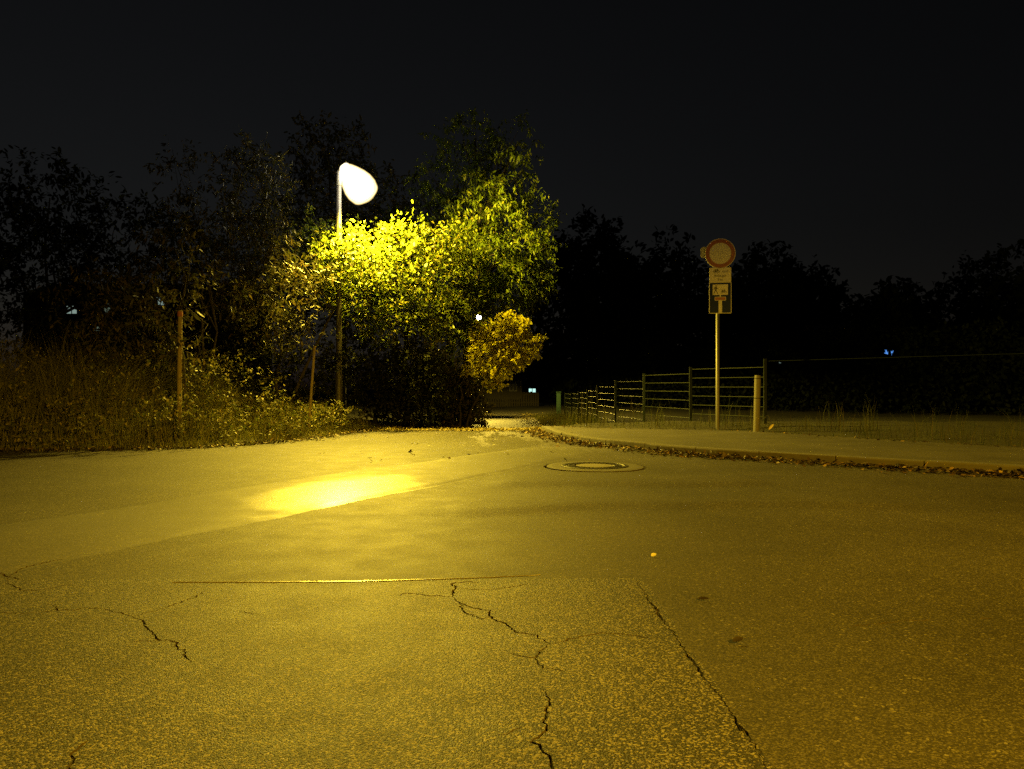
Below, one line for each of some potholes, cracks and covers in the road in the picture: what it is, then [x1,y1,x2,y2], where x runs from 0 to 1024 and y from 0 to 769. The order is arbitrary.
crack [400,581,657,671]
manhole cover [544,461,647,472]
crack [0,559,203,661]
crack [501,689,554,769]
crack [67,740,88,769]
